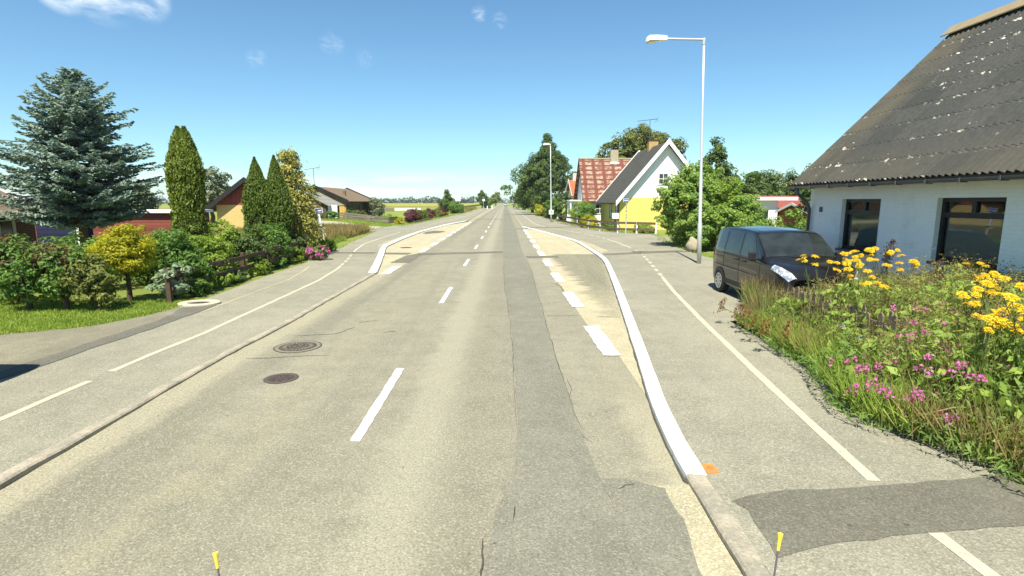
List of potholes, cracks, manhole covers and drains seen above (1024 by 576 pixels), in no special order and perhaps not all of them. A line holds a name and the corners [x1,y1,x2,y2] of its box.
manhole cover [263,373,299,384]
manhole cover [273,341,322,353]
manhole cover [177,299,221,307]
